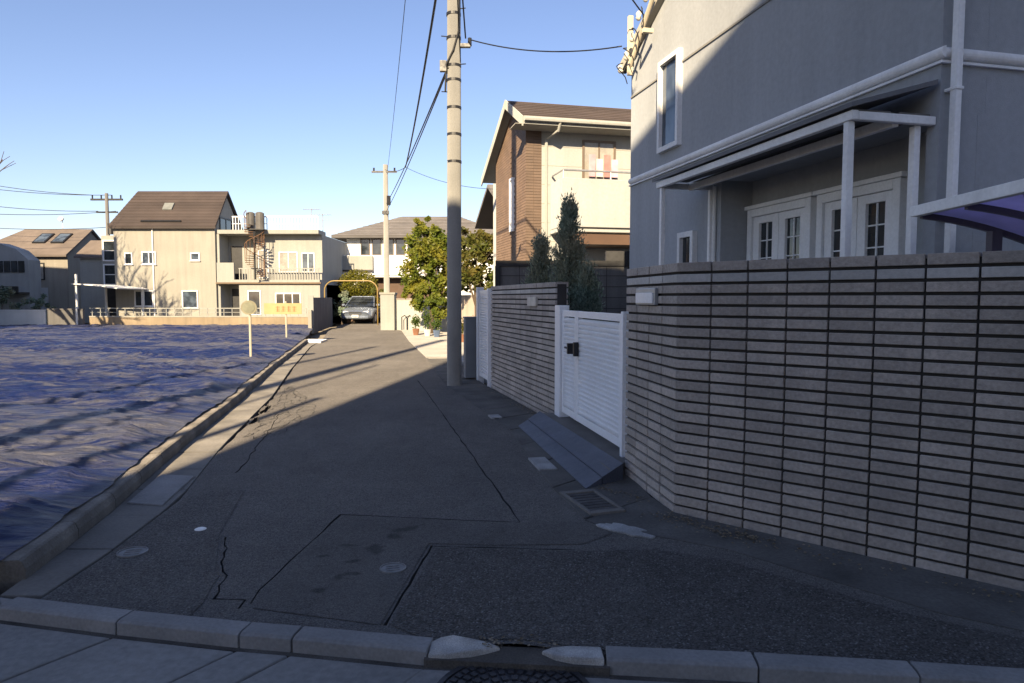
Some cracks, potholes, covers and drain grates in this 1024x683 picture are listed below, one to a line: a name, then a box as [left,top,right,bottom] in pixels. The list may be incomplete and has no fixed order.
crack [212,381,520,609]
manhole cover [437,666,589,683]
manhole cover [380,562,406,574]
crack [221,345,316,473]
manhole cover [116,546,149,558]
